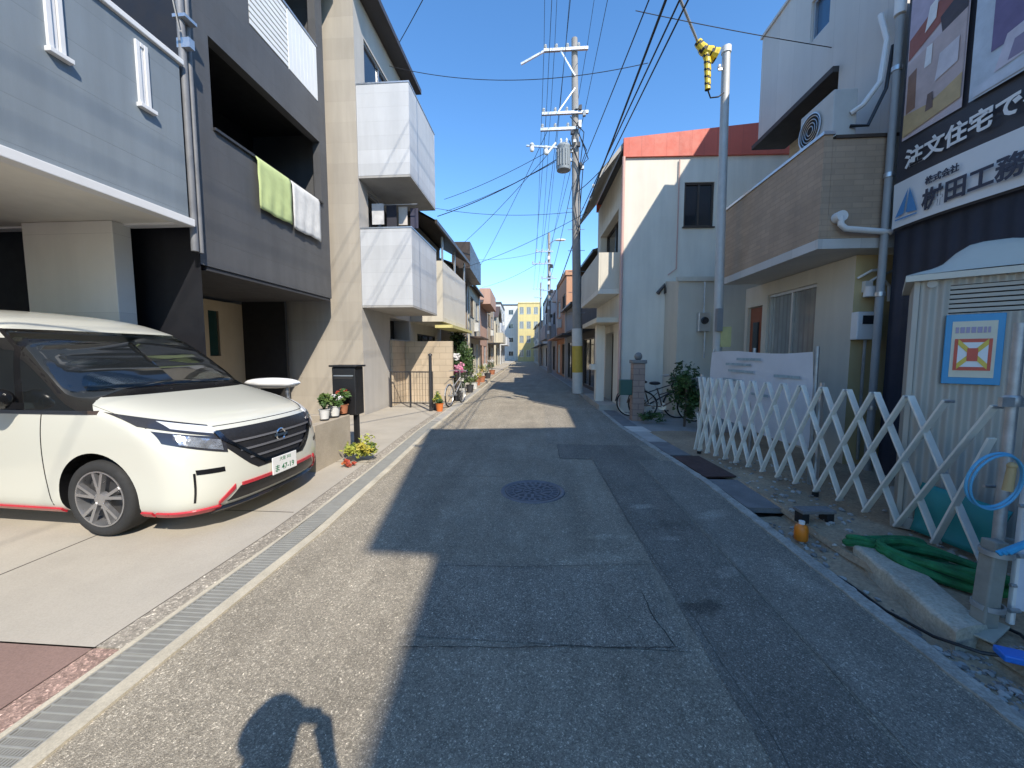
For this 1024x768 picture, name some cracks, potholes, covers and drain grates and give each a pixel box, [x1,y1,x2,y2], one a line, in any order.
drain grate [363,455,400,476]
drain grate [0,654,153,768]
manhole cover [501,480,565,504]
drain grate [122,556,281,656]
drain grate [325,476,376,506]
drain grate [258,506,342,556]
